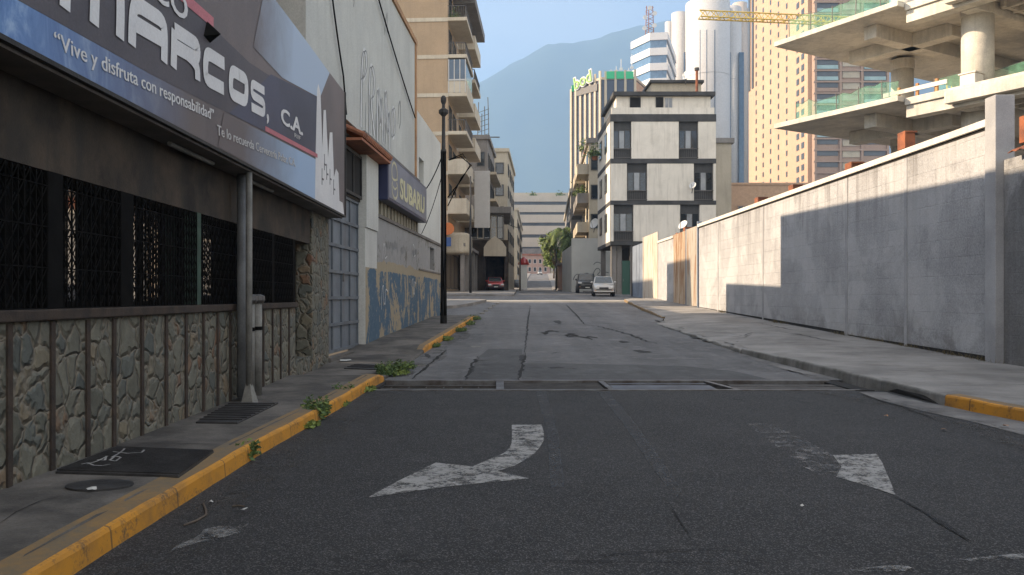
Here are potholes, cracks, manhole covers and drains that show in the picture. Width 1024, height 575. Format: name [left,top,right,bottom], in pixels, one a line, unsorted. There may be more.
crack [464,356,485,380]
manhole cover [55,446,214,478]
crack [517,306,657,380]
manhole cover [65,479,134,492]
